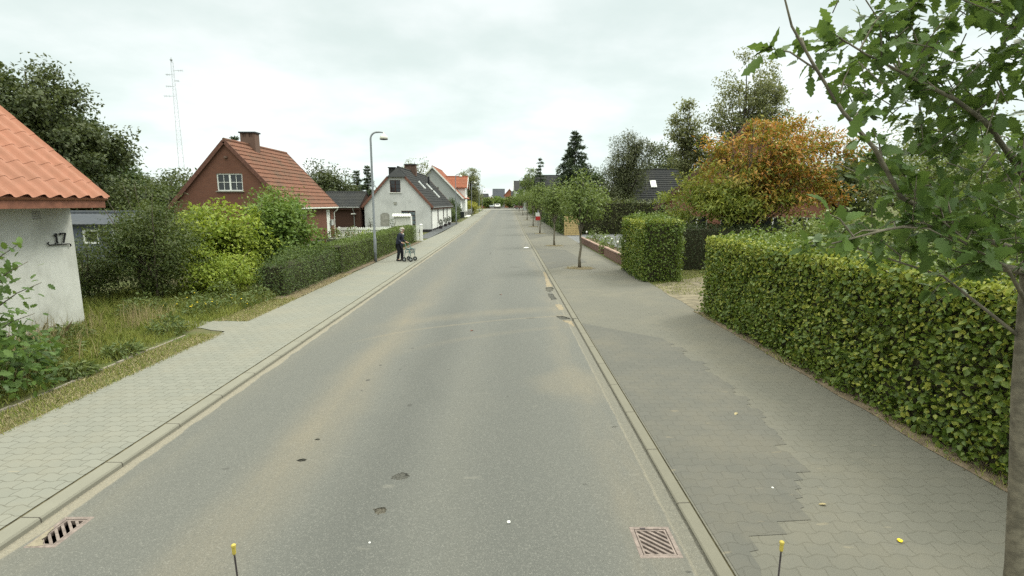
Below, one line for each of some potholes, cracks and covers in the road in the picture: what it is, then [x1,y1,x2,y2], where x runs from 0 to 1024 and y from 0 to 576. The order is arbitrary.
drain grate [629,527,683,558]
drain grate [23,517,94,548]
